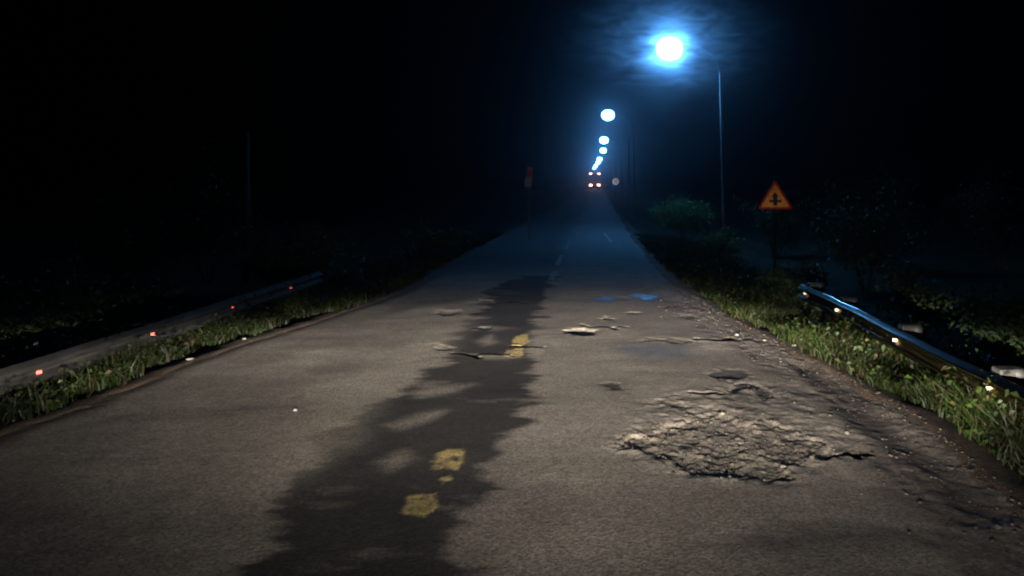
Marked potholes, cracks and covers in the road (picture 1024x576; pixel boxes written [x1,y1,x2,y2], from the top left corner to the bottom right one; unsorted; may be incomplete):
crack [448,345,550,360]
crack [838,451,877,461]
pothole [558,327,602,337]
pothole [429,309,465,317]
pothole [596,381,630,391]
pothole [600,409,852,486]
pothole [641,396,699,416]
pothole [724,381,783,402]
pothole [424,343,460,352]
pothole [699,367,757,383]
